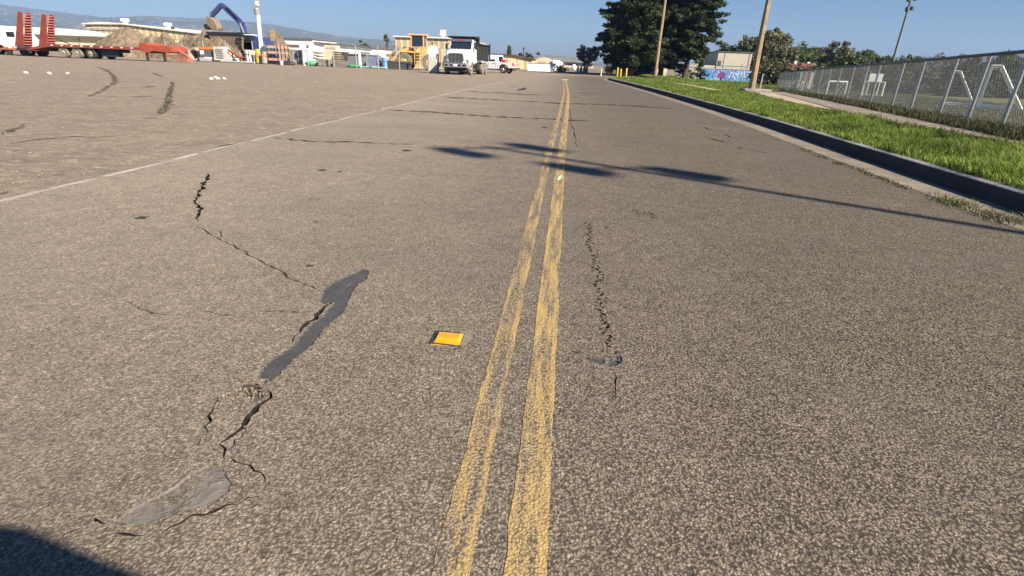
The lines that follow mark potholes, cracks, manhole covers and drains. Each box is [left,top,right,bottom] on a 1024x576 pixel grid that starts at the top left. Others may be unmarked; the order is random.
crack [62,379,273,538]
crack [126,174,334,342]
crack [584,223,621,404]
pothole [236,384,264,401]
